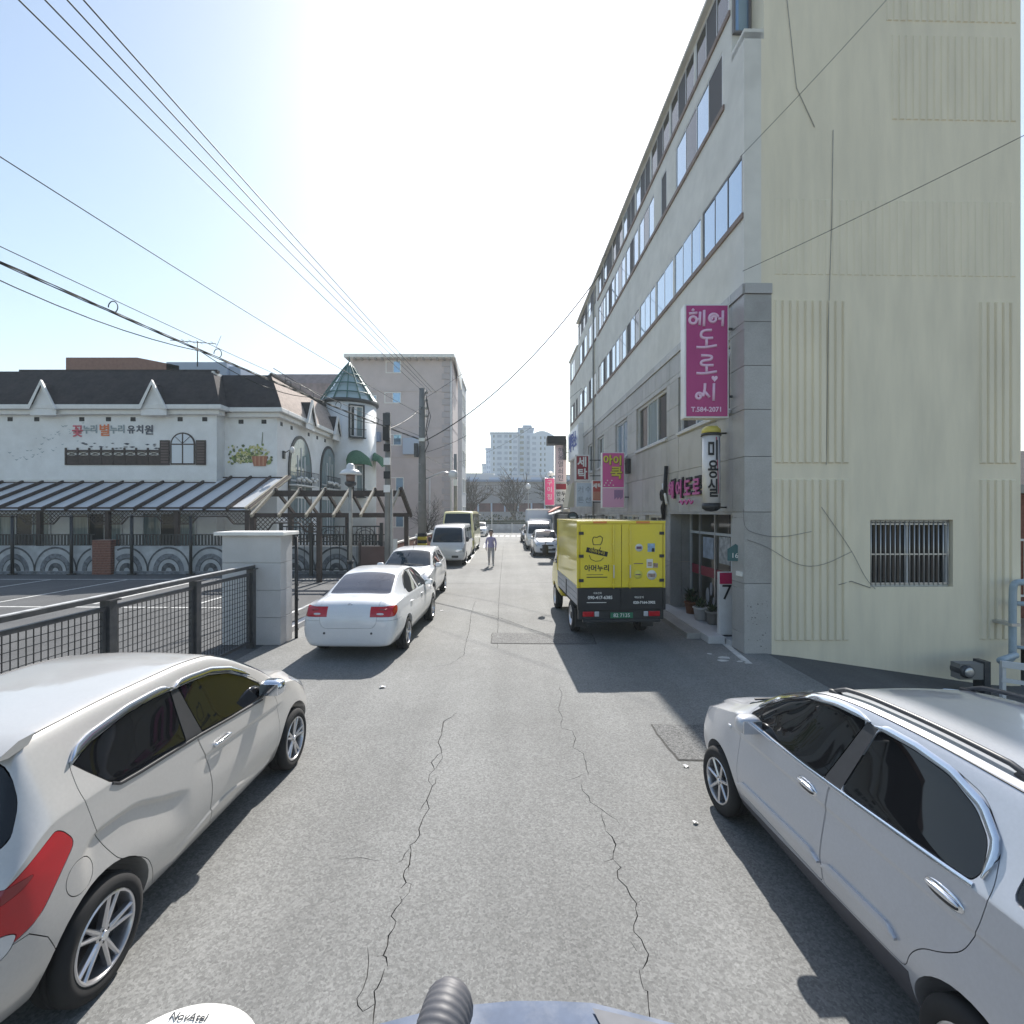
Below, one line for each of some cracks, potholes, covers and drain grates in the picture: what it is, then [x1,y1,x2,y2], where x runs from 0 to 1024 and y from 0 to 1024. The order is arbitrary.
crack [347,716,454,1022]
crack [559,688,650,1017]
